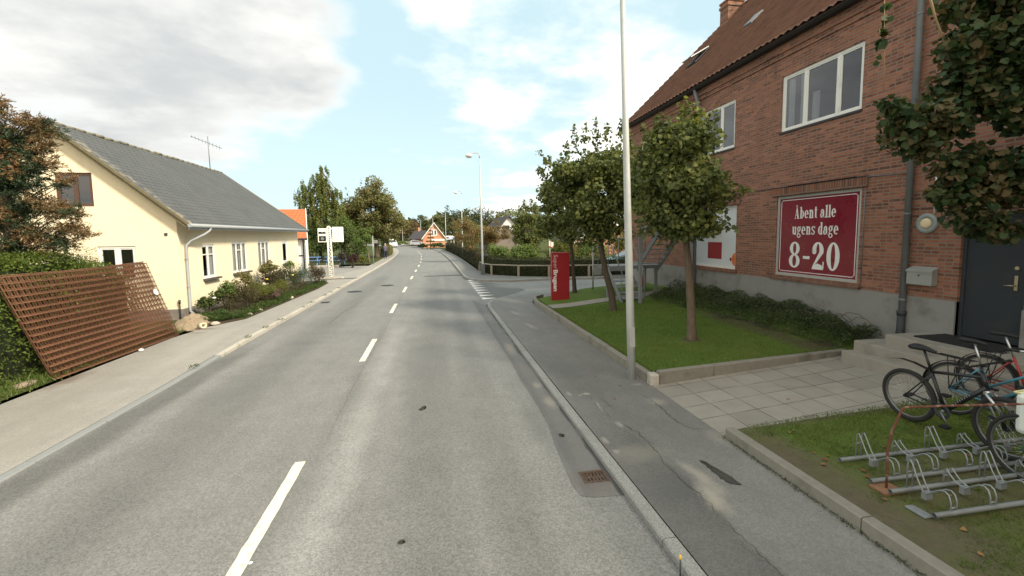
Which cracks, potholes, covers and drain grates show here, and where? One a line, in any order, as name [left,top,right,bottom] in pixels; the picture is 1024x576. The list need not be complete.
pothole [699,460,742,485]
crack [590,396,783,576]
drain grate [578,469,611,484]
